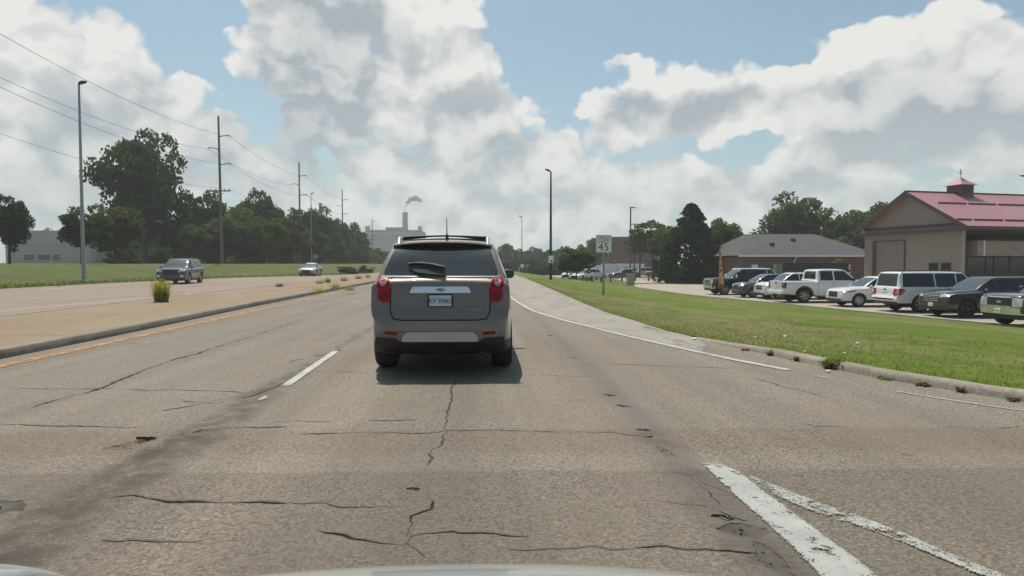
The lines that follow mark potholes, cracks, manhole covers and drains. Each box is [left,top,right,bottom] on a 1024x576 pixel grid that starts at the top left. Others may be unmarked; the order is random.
pothole [104,441,145,451]
crack [666,469,748,521]
crack [4,379,651,465]
crack [22,319,303,411]
crack [111,494,756,558]
